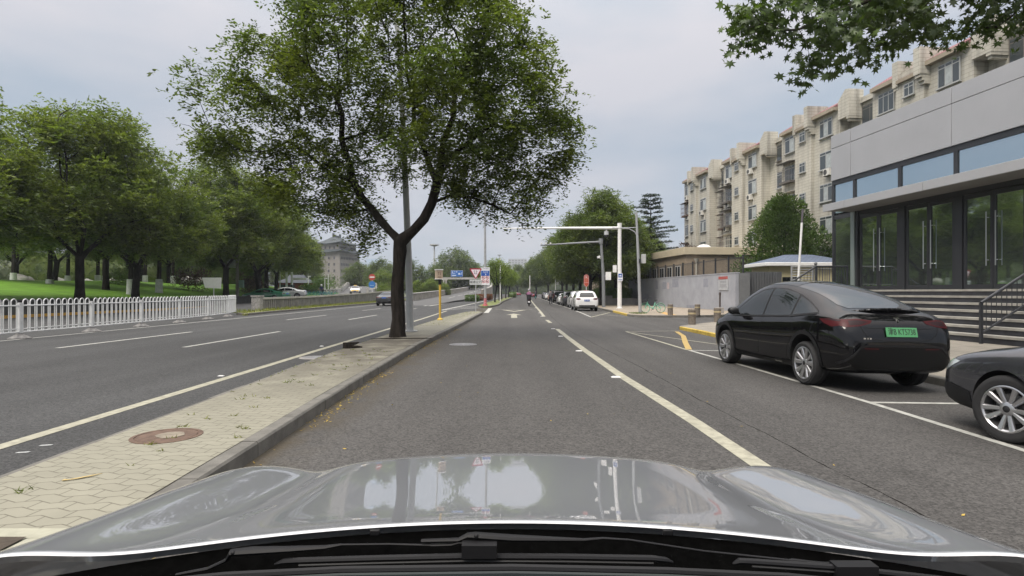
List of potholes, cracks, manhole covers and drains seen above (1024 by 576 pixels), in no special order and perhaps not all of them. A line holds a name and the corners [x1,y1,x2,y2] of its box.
manhole cover [128,428,203,444]
